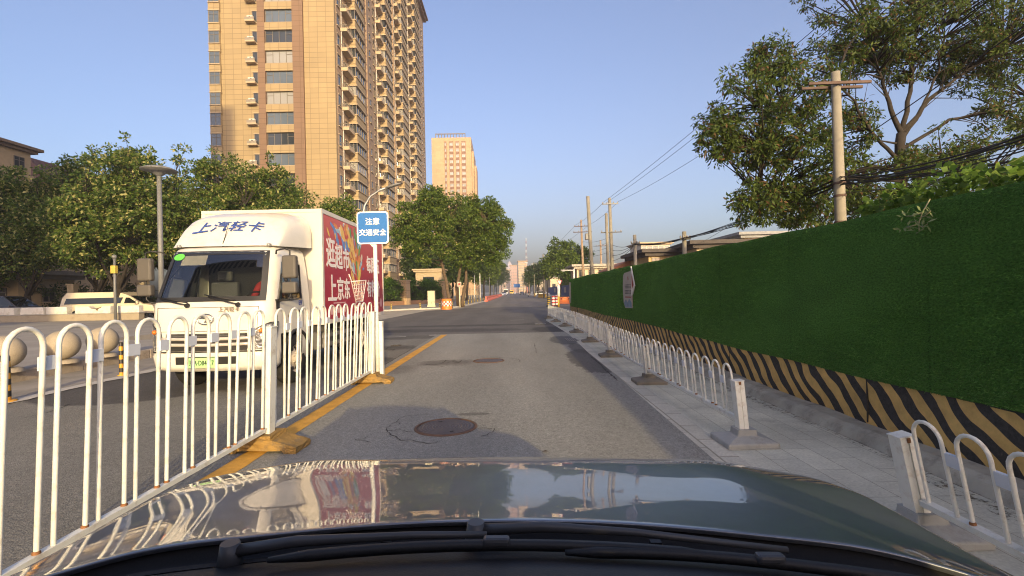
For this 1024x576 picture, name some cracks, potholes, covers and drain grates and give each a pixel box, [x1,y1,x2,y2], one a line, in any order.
crack [354,414,438,443]
manhole cover [414,418,477,437]
